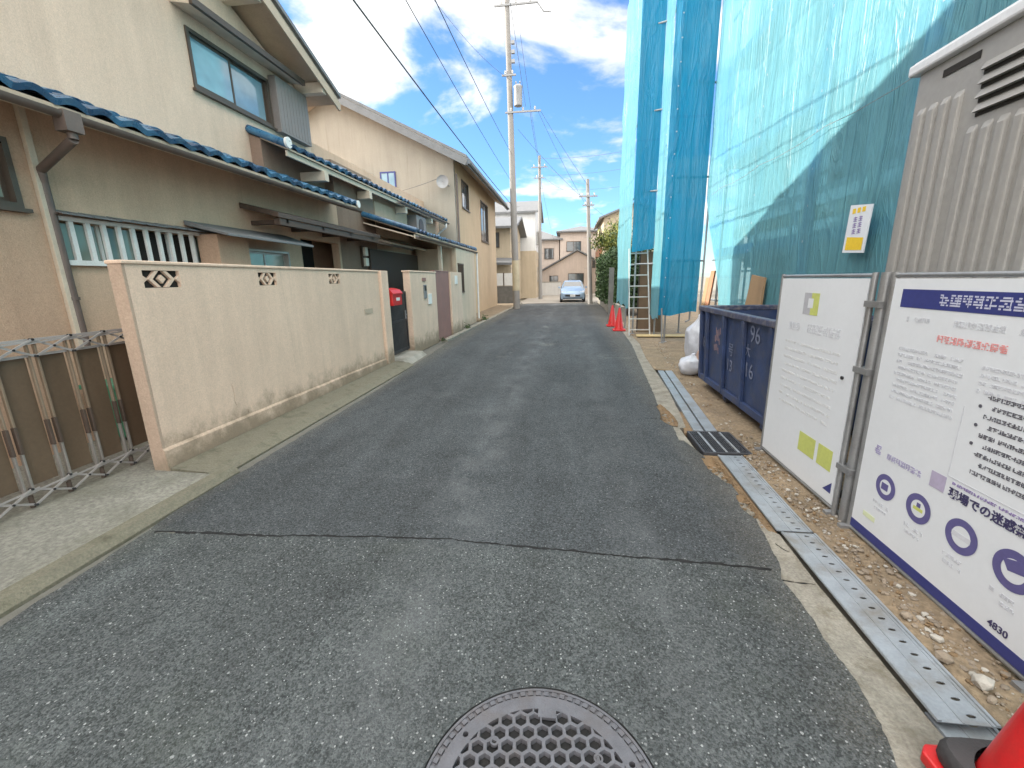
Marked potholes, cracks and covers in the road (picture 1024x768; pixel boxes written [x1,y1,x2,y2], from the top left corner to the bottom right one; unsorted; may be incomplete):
crack [155,531,813,585]
manhole cover [426,688,652,768]
drain grate [687,431,752,459]
